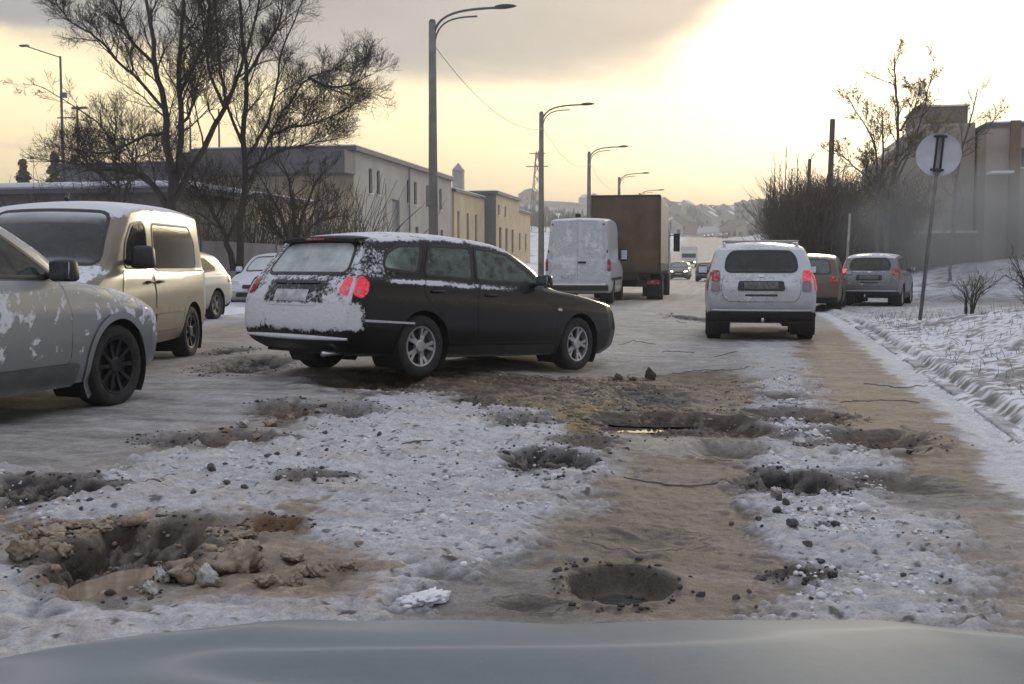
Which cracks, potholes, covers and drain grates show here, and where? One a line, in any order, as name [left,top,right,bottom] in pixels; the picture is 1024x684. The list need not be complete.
pothole [196,431,282,448]
pothole [250,399,317,423]
pothole [566,565,680,605]
crack [624,477,719,487]
pothole [807,425,943,454]
pothole [564,411,785,439]
pothole [0,474,120,509]
pothole [139,432,214,448]
pothole [205,357,294,374]
pothole [35,519,210,601]
pothole [755,469,845,495]
pothole [486,594,569,614]
